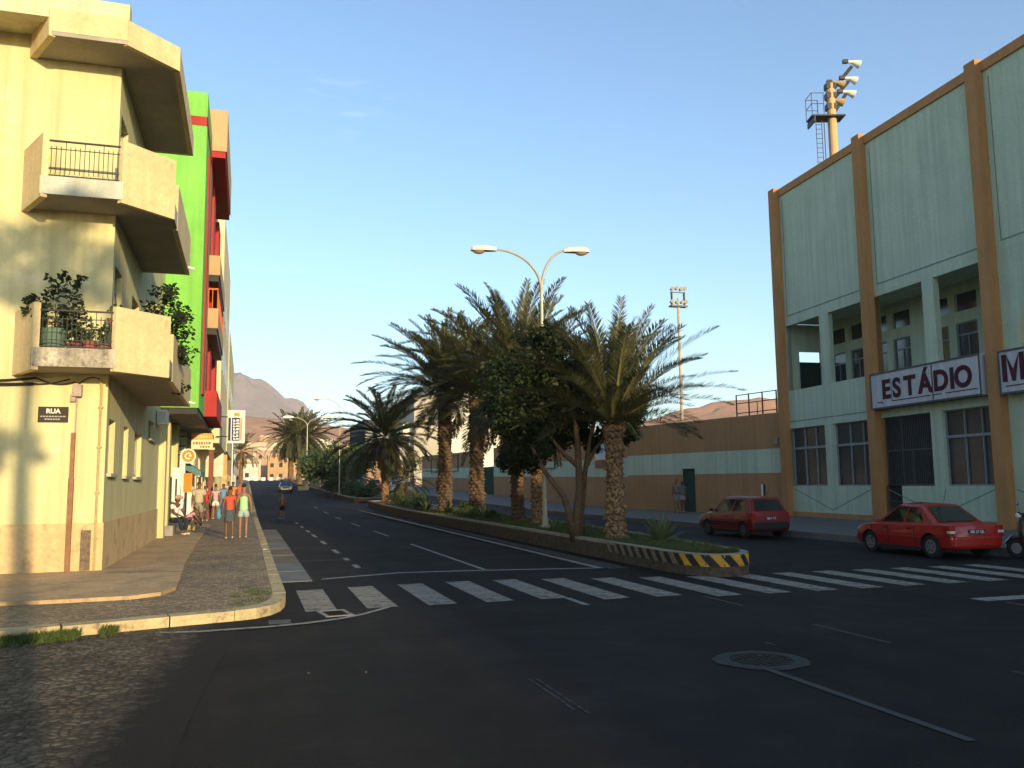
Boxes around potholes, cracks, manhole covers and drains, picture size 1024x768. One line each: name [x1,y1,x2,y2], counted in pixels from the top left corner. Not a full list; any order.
manhole cover [712,651,811,670]
